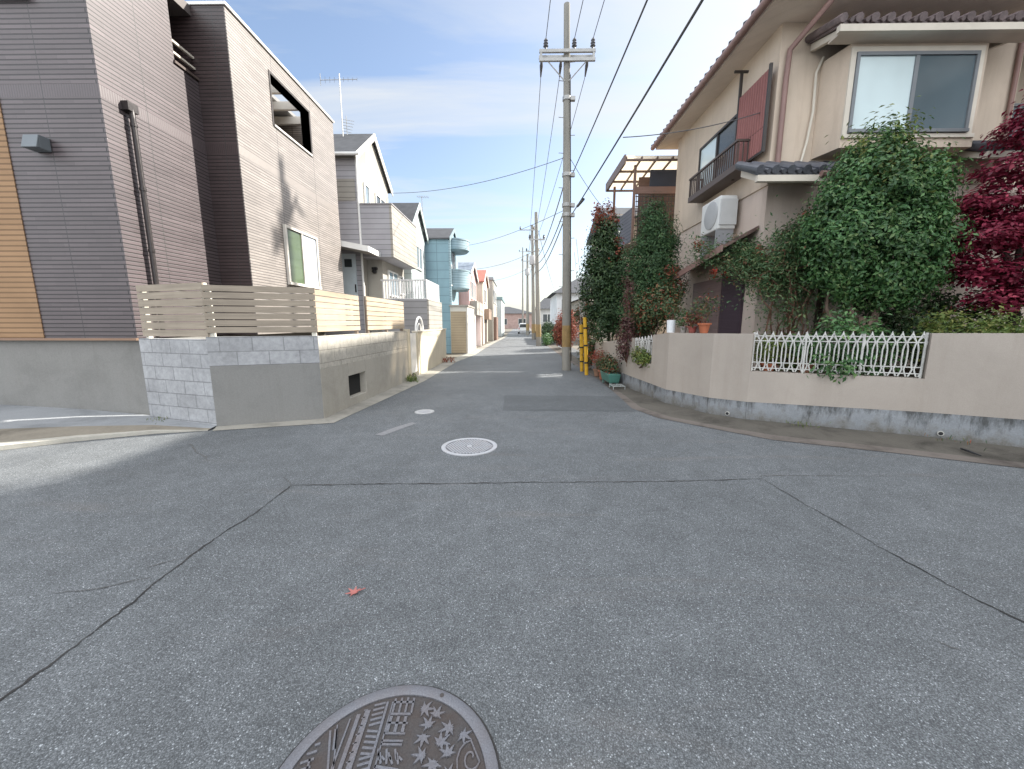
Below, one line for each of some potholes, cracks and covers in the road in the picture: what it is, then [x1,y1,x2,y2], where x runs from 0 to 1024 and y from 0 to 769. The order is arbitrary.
crack [51,557,184,594]
manhole cover [441,438,497,456]
manhole cover [278,684,501,769]
